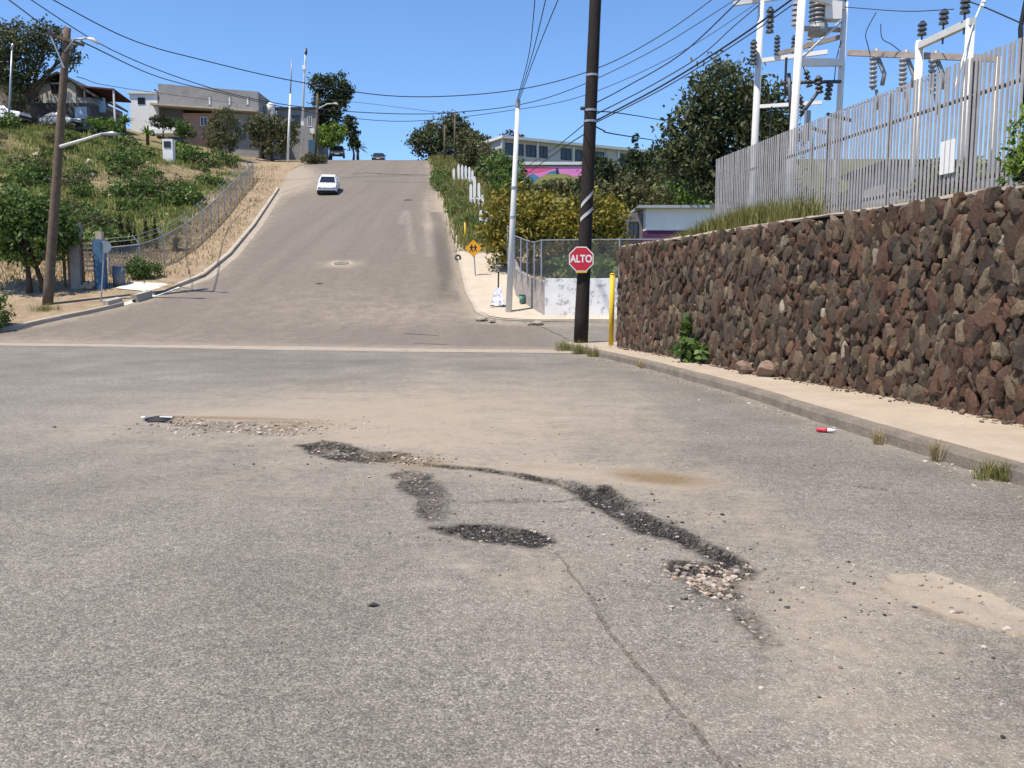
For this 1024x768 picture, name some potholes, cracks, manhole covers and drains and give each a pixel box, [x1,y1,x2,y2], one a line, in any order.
pothole [664,562,753,599]
pothole [161,416,311,436]
